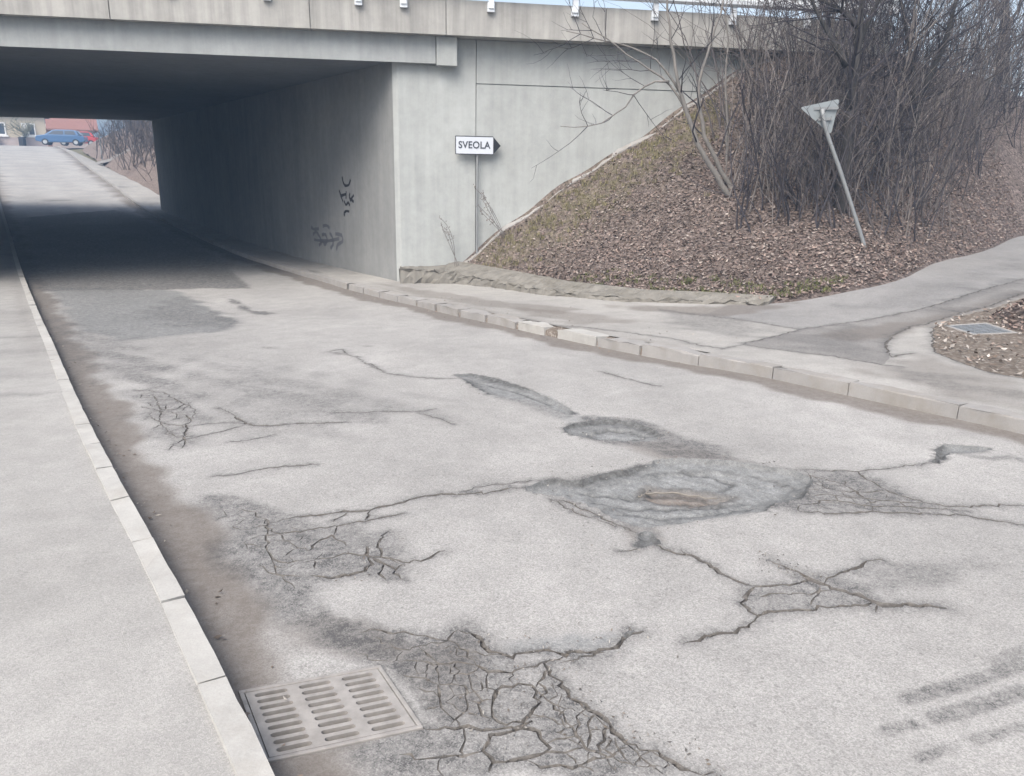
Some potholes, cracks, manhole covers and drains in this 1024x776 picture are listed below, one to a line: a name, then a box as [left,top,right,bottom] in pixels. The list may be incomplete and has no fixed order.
crack [355,463,1024,776]
drain grate [943,323,1018,335]
drain grate [239,665,424,763]
pothole [932,445,992,464]
crack [217,480,535,588]
crack [329,349,452,379]
crack [135,387,451,477]
